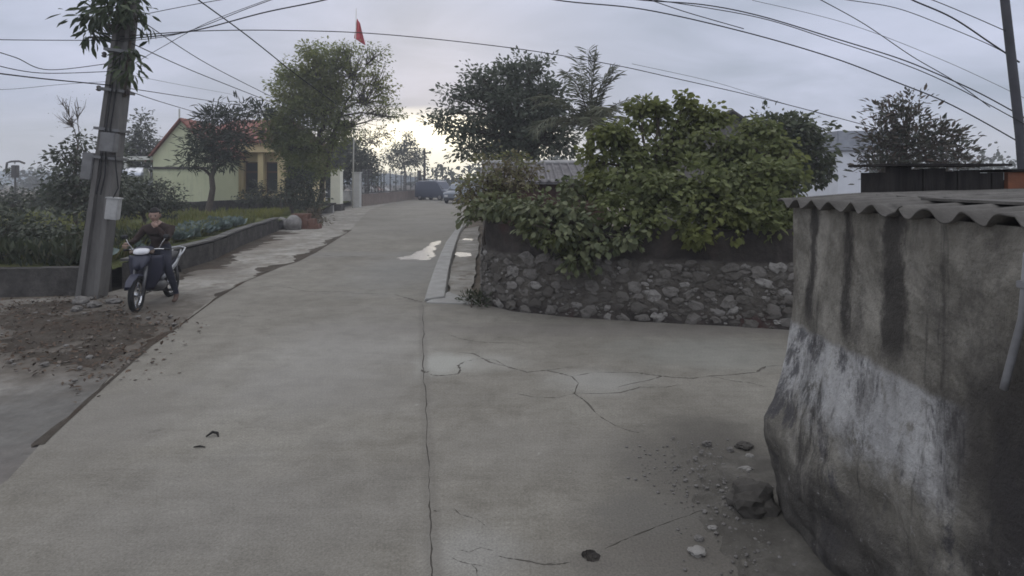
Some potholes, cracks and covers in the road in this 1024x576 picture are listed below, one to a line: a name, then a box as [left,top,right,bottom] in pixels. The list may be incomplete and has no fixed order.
crack [430,335,782,433]
crack [455,511,699,572]
pothole [581,550,600,562]
